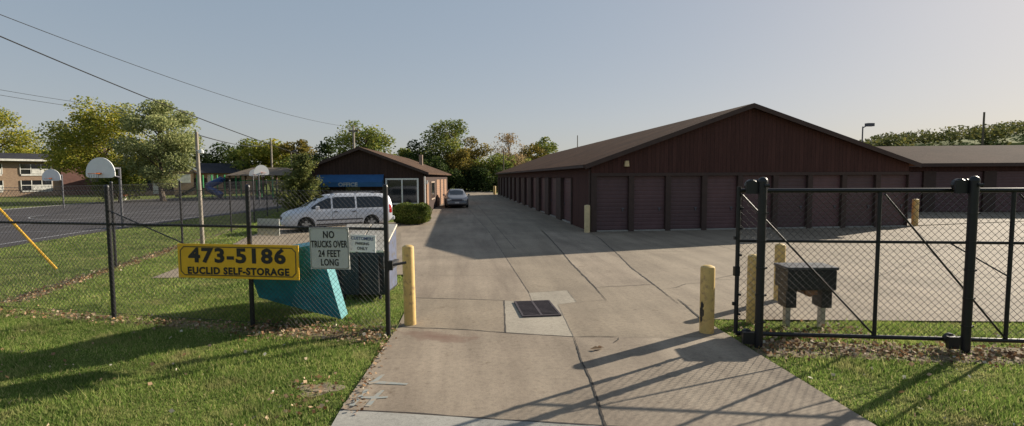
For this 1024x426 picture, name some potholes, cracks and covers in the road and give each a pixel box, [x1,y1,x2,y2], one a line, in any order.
drain grate [514,300,562,317]
